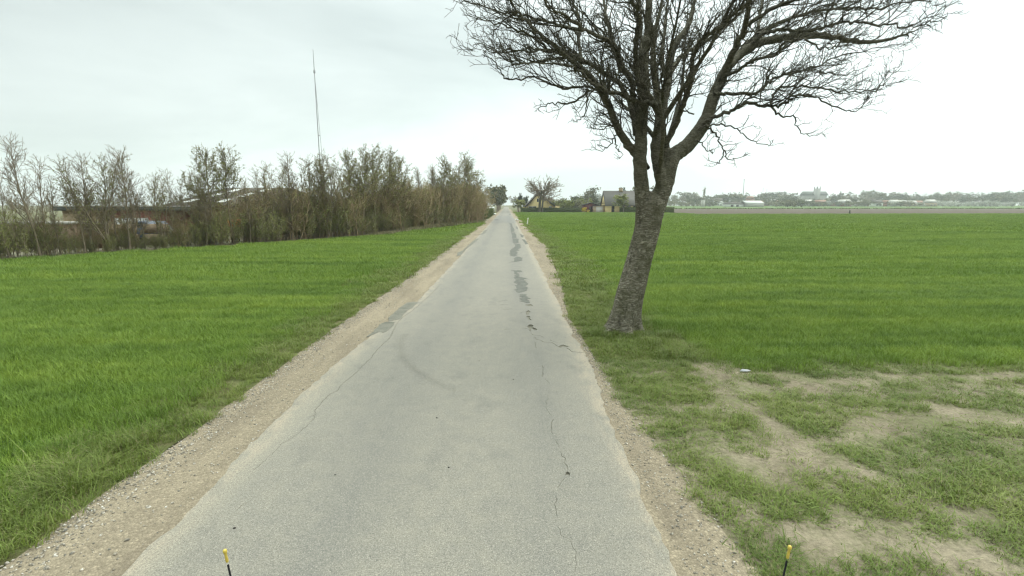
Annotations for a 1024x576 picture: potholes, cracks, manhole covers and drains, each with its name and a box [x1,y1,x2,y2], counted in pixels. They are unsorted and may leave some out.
crack [505,328,583,568]
crack [255,288,437,469]
